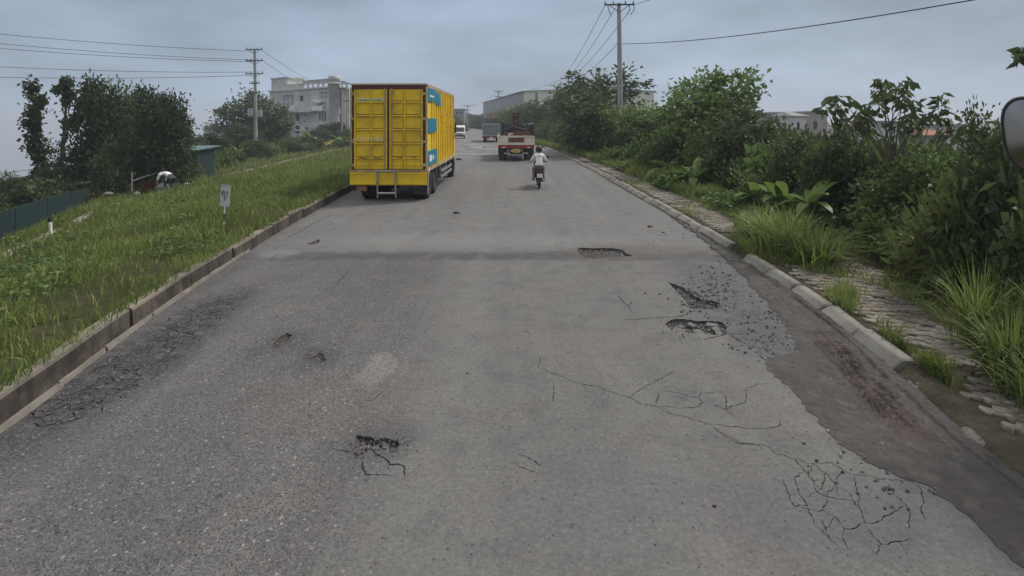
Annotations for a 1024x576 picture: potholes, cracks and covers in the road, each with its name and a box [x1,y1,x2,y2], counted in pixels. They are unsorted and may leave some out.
pothole [577,248,632,259]
pothole [354,435,401,461]
pothole [665,319,727,336]
crack [724,435,926,554]
pothole [272,333,292,349]
pothole [669,282,720,309]
crack [538,357,781,446]
